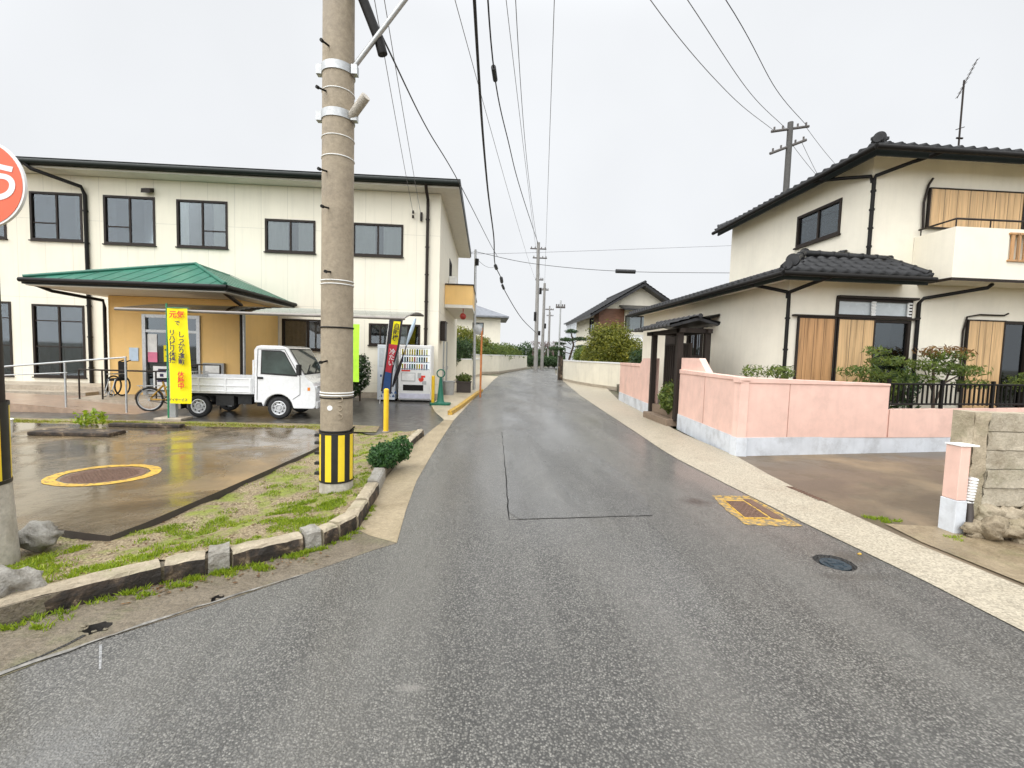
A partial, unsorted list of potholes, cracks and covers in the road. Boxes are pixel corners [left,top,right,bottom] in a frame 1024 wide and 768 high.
manhole cover [812,554,858,571]
manhole cover [712,495,803,526]
manhole cover [41,464,161,486]
pothole [78,621,113,642]
